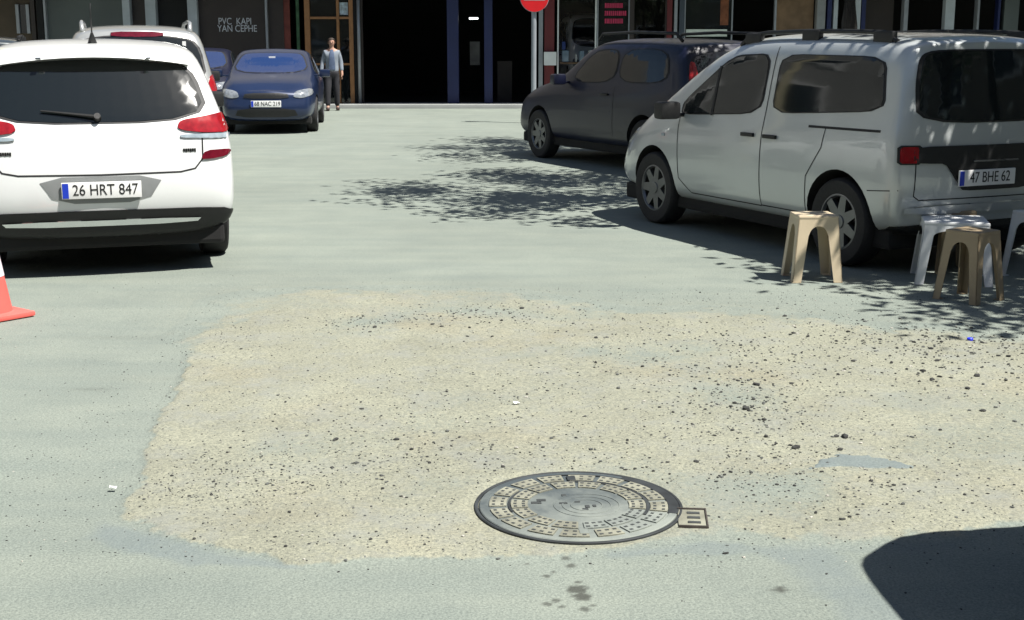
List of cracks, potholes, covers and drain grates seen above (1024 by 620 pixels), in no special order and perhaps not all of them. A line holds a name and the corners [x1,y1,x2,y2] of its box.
manhole cover [474,471,709,545]
